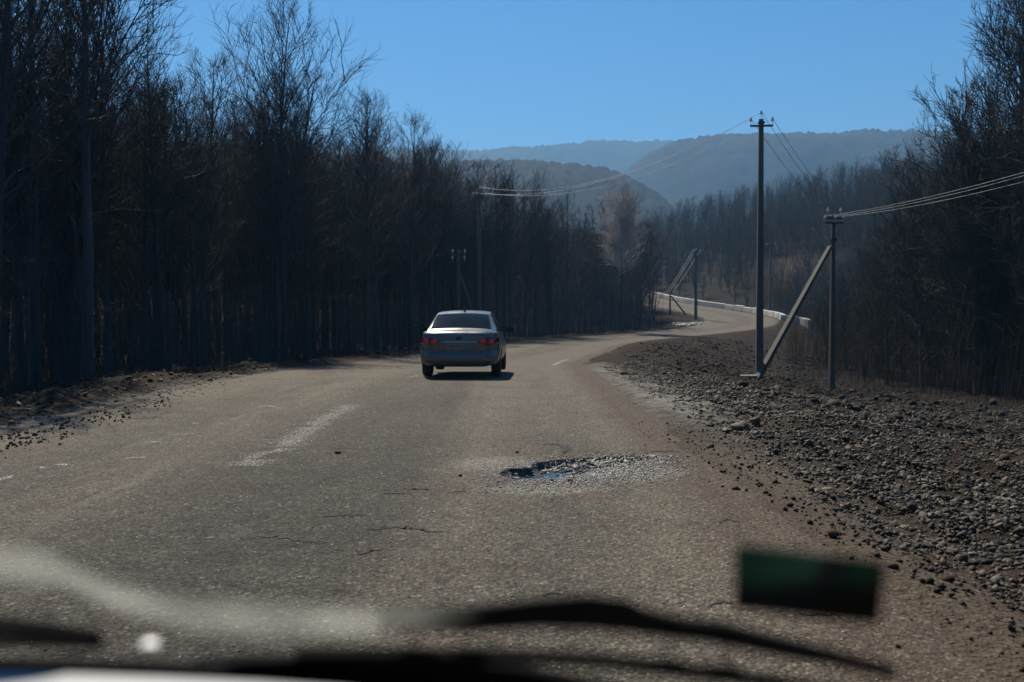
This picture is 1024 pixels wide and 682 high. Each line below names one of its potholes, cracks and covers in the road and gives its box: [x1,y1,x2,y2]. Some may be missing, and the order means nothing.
crack [321,513,450,554]
crack [243,535,325,543]
pothole [499,454,659,480]
